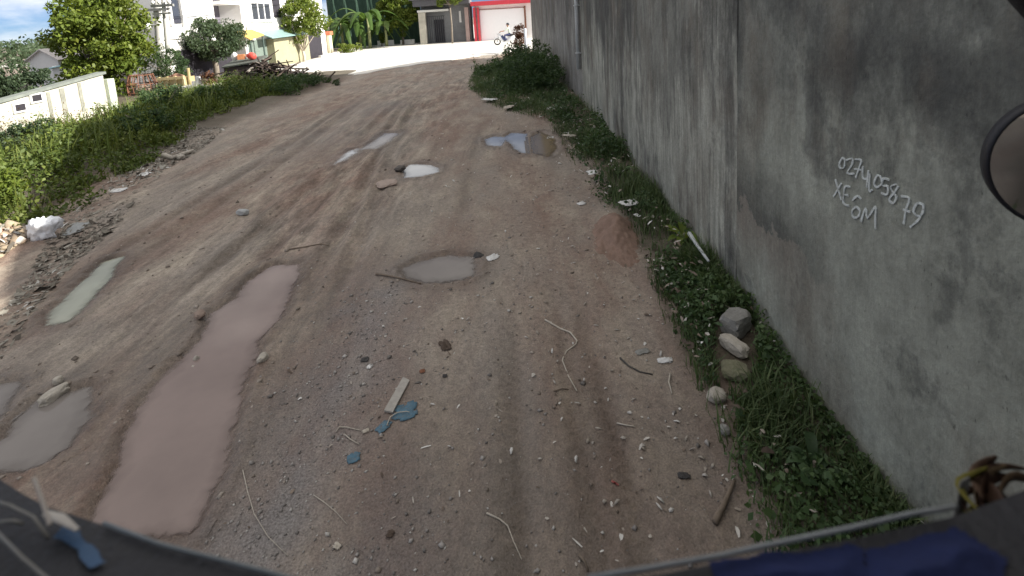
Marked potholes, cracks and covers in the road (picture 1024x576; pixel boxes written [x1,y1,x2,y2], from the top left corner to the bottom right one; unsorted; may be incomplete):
pothole [353,130,407,152]
pothole [498,130,536,157]
pothole [477,134,509,148]
pothole [388,248,488,291]
pothole [0,371,119,489]
pothole [323,145,366,167]
pothole [21,249,137,335]
pothole [395,161,447,180]
pothole [61,255,314,550]
